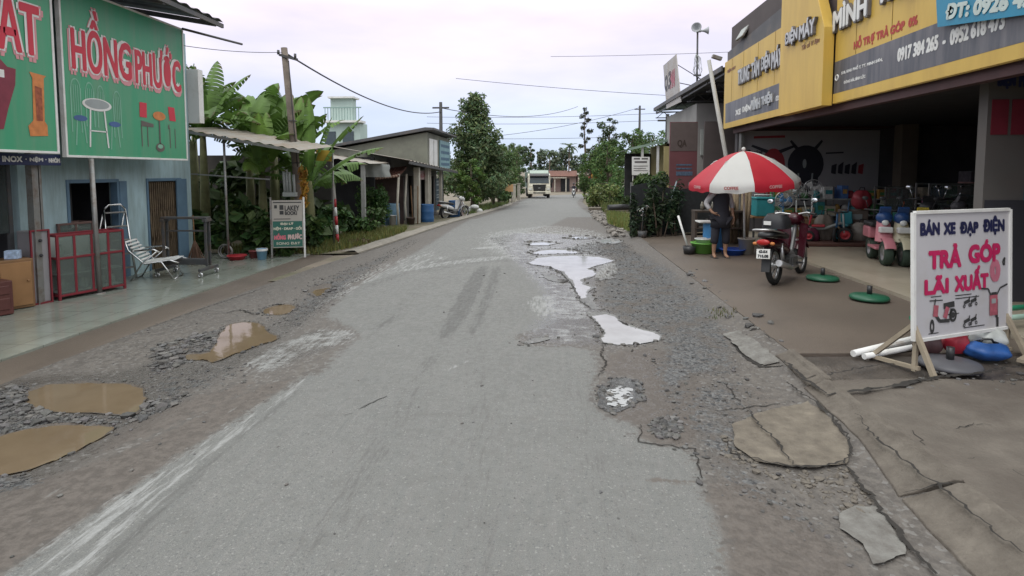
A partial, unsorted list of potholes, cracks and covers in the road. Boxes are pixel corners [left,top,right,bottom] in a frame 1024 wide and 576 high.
pothole [0,418,133,478]
pothole [174,320,280,363]
pothole [647,415,685,440]
pothole [527,255,615,310]
pothole [301,280,338,297]
pothole [11,378,154,416]
pothole [252,303,303,316]
pothole [594,377,647,415]
pothole [581,312,667,347]
crack [637,424,703,479]
